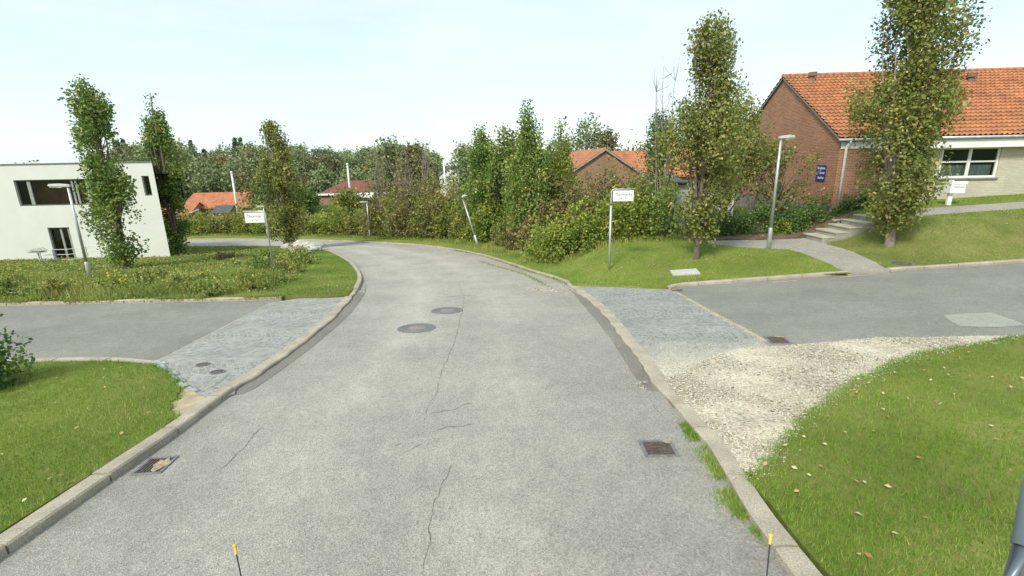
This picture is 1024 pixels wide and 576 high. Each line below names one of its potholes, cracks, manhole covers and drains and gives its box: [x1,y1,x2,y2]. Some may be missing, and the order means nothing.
drain grate [764,336,793,344]
drain grate [638,439,680,457]
manhole cover [397,323,436,333]
drain grate [129,455,179,476]
crack [423,287,470,430]
crack [423,464,452,565]
